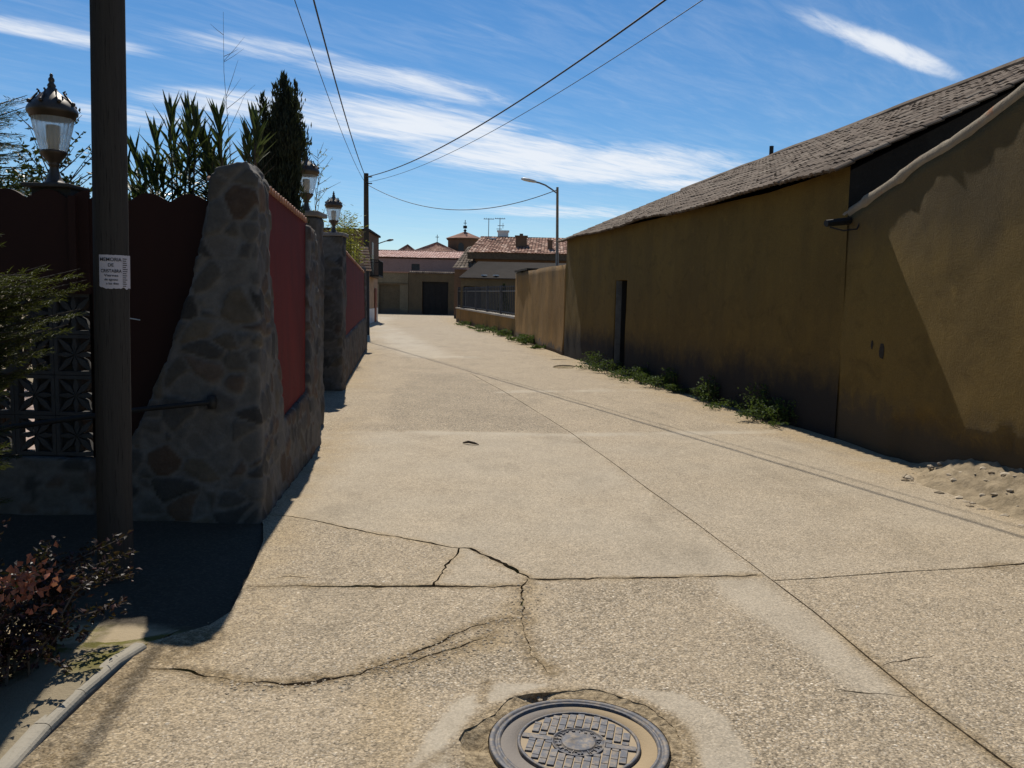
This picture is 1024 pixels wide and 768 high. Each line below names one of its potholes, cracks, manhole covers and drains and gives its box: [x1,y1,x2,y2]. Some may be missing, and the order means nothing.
crack [256,514,756,672]
crack [834,688,906,697]
crack [150,618,510,686]
manhole cover [489,699,670,768]
